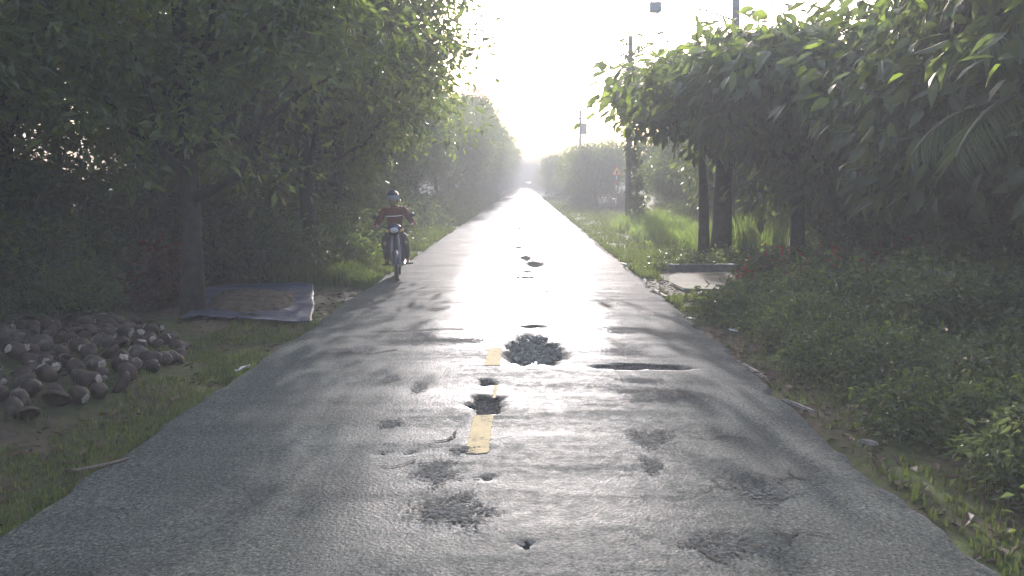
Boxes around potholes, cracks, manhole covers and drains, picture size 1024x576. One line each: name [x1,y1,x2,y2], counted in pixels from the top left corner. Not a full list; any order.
pothole [504,333,569,366]
pothole [466,394,503,415]
